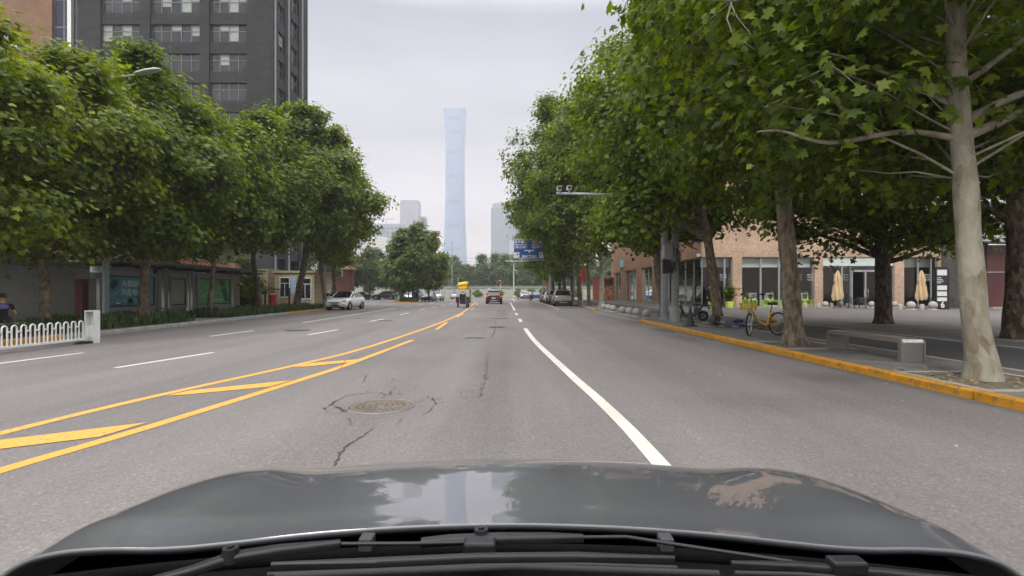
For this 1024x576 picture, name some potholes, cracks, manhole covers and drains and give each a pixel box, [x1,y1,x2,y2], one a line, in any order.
crack [323,357,489,465]
manhole cover [346,399,415,414]
